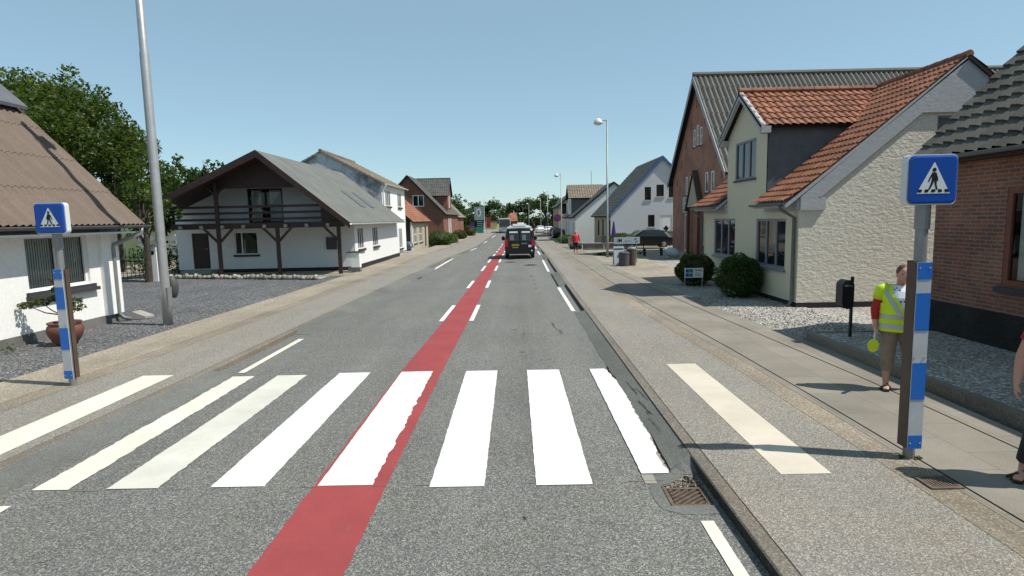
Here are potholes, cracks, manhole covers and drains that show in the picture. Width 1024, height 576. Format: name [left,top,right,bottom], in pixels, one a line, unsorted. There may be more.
drain grate [913,475,965,493]
drain grate [662,487,713,506]
